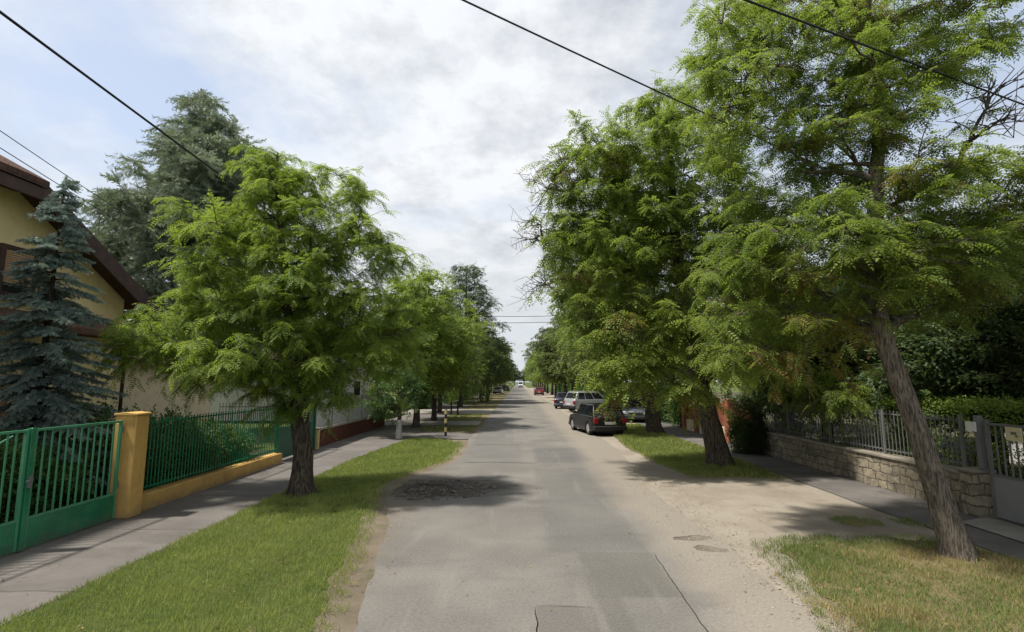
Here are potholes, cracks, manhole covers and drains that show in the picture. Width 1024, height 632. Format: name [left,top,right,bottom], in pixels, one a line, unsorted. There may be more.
crack [655,554,708,632]
pothole [404,483,454,498]
